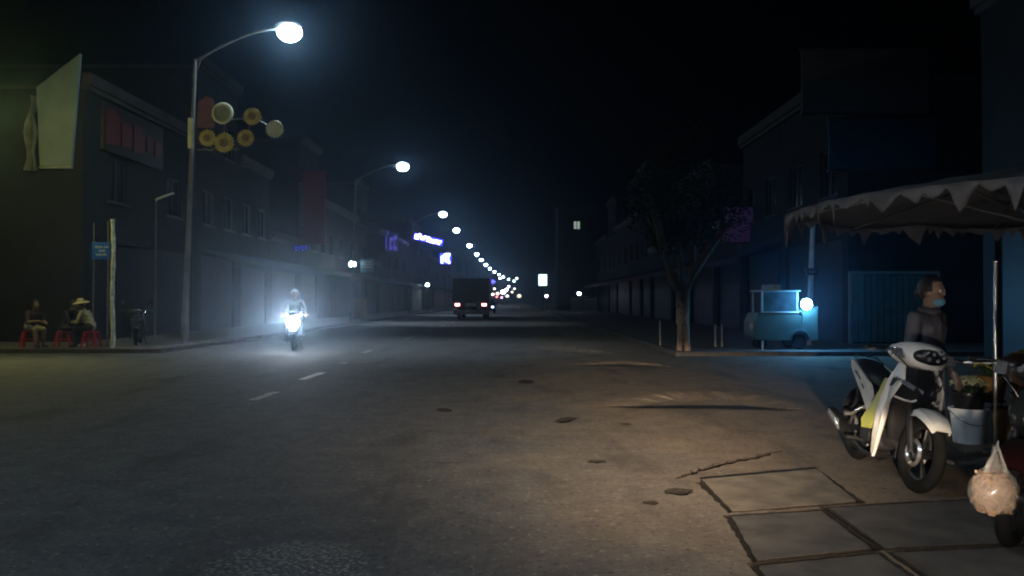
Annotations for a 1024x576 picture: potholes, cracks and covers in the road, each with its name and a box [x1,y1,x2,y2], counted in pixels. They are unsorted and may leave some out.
pothole [663,488,693,496]
crack [675,451,782,479]
